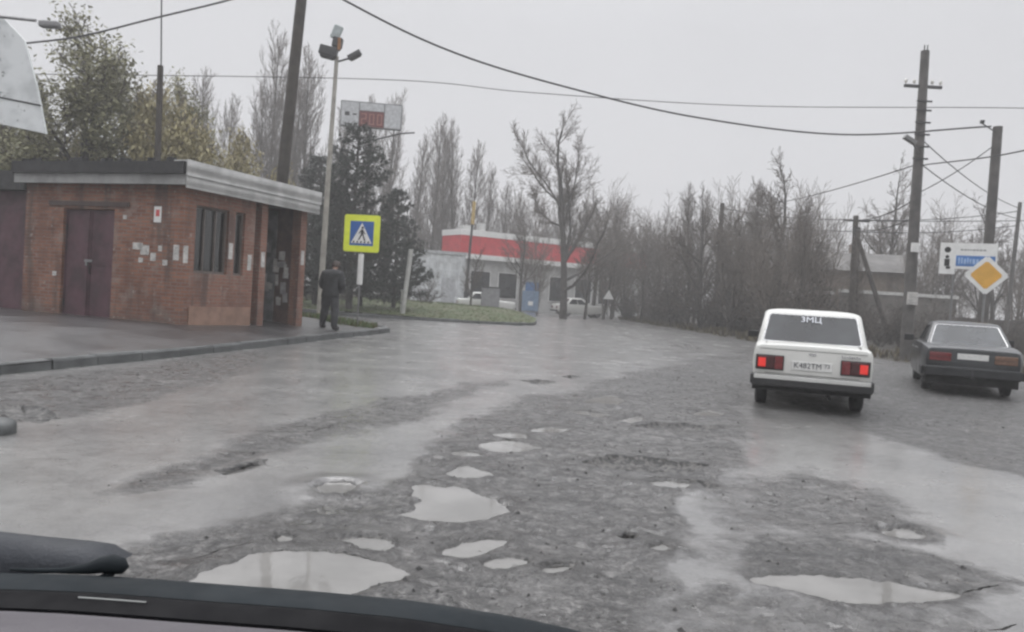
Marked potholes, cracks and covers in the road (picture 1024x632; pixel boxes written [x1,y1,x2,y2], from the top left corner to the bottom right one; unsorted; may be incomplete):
pothole [483,557,534,569]
pothole [399,485,510,522]
pothole [749,575,961,604]
pothole [313,481,358,493]
pothole [879,527,927,539]
crack [963,585,998,593]
pothole [446,466,494,478]
pothole [650,477,721,488]
pothole [478,438,542,452]
pothole [442,539,509,559]
pothole [337,535,399,551]
pothole [214,458,268,475]
